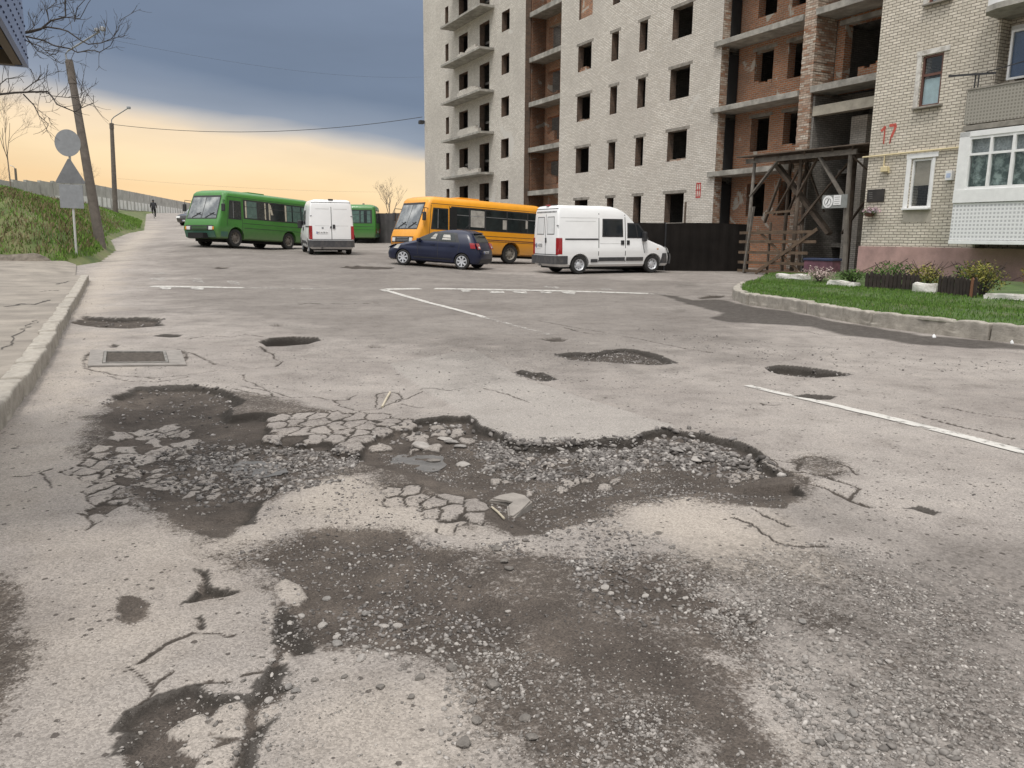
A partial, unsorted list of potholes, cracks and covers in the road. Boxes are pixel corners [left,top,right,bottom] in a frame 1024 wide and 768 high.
pothole [514,370,558,382]
pothole [258,336,321,347]
pothole [69,316,166,329]
pothole [555,348,678,366]
pothole [765,364,854,378]
pothole [354,415,808,538]
crack [714,435,878,548]
crack [120,630,267,713]
pothole [82,384,356,542]
